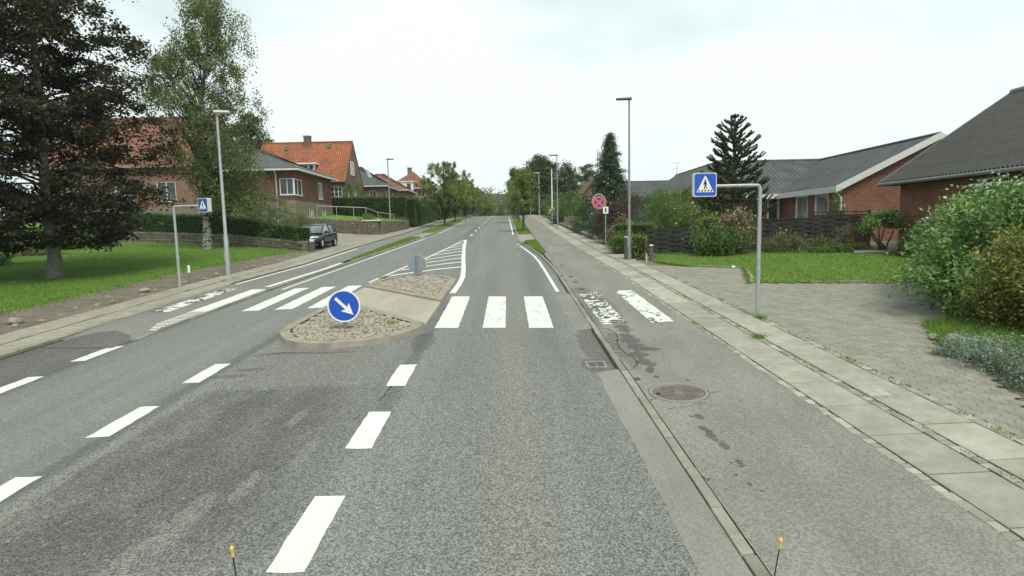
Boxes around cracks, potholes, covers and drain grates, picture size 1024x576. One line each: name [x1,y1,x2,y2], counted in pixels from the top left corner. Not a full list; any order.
manhole cover [648,383,710,403]
